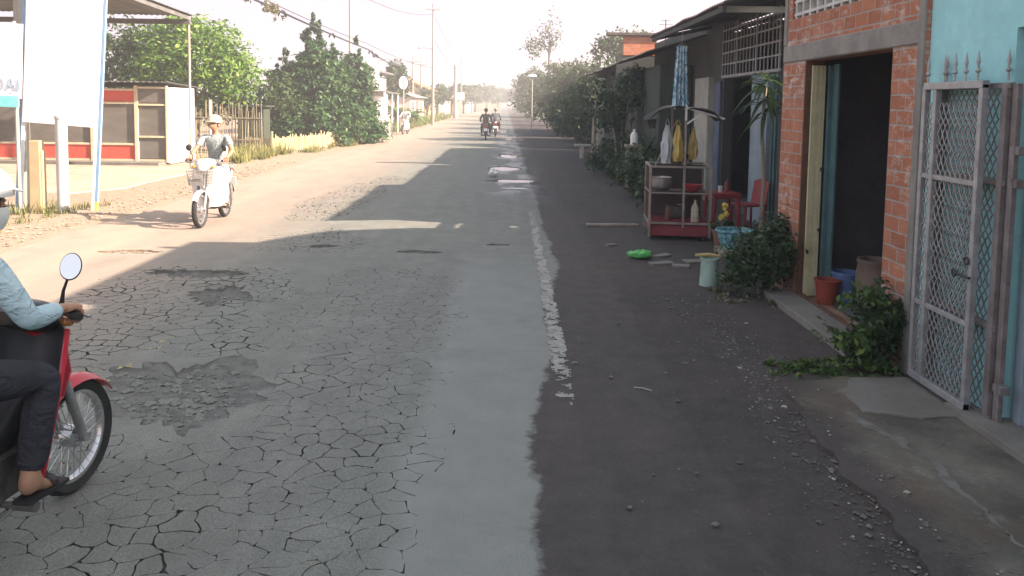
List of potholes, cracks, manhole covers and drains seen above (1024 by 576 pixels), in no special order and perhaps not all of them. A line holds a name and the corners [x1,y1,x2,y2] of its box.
crack [55,264,467,408]
crack [0,351,455,576]
pothole [81,355,278,437]
pothole [146,269,246,278]
pothole [186,285,253,308]
crack [845,409,1024,548]
